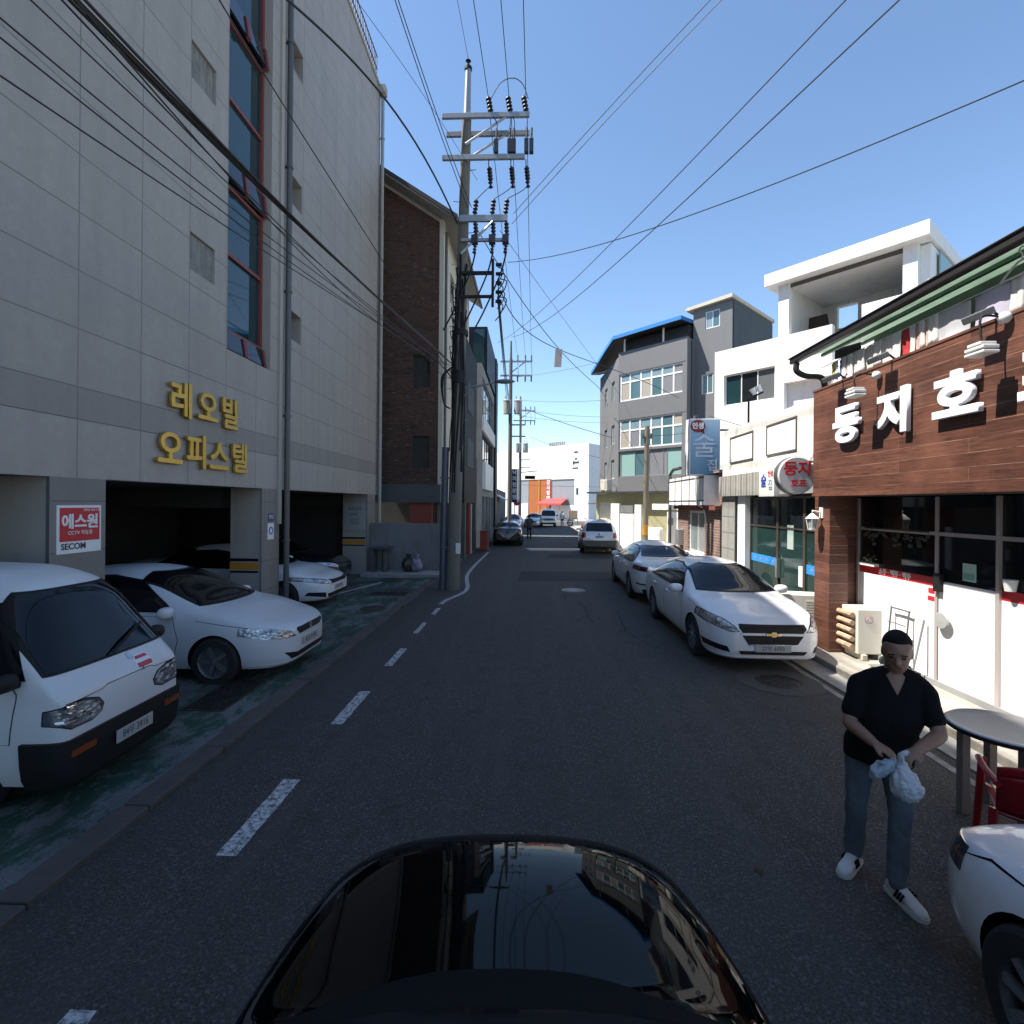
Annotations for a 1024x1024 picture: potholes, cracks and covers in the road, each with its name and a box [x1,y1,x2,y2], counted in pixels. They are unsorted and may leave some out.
manhole cover [735,669,826,697]
